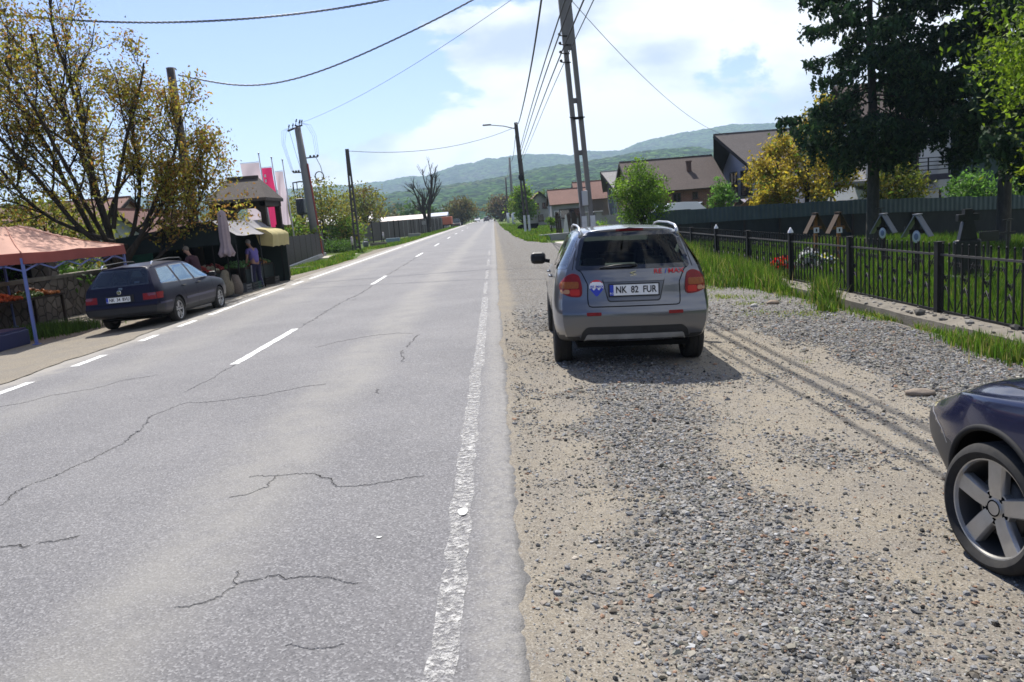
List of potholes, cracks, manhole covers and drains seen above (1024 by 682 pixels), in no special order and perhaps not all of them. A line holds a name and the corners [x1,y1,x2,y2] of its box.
crack [319,333,420,362]
crack [174,570,358,608]
crack [0,535,80,548]
crack [1,365,323,505]
crack [229,473,421,498]
